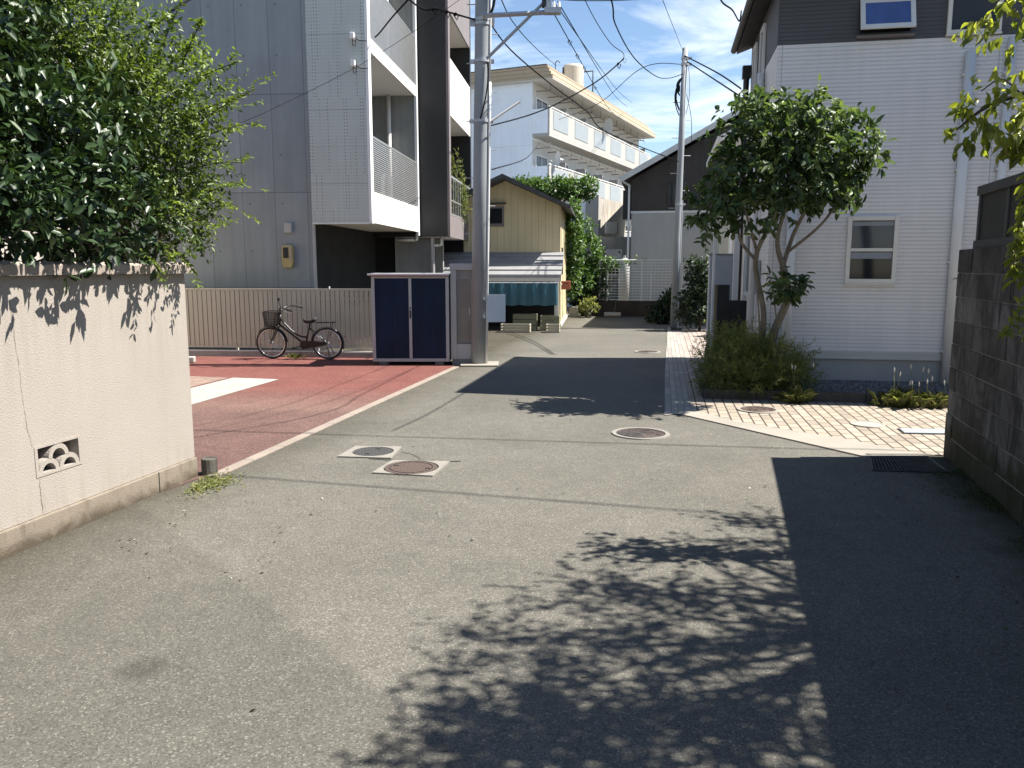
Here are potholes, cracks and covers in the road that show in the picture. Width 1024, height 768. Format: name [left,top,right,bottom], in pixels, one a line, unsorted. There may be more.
manhole cover [612,427,670,440]
manhole cover [337,446,402,459]
manhole cover [737,406,779,414]
drain grate [869,456,949,473]
manhole cover [372,460,450,477]
